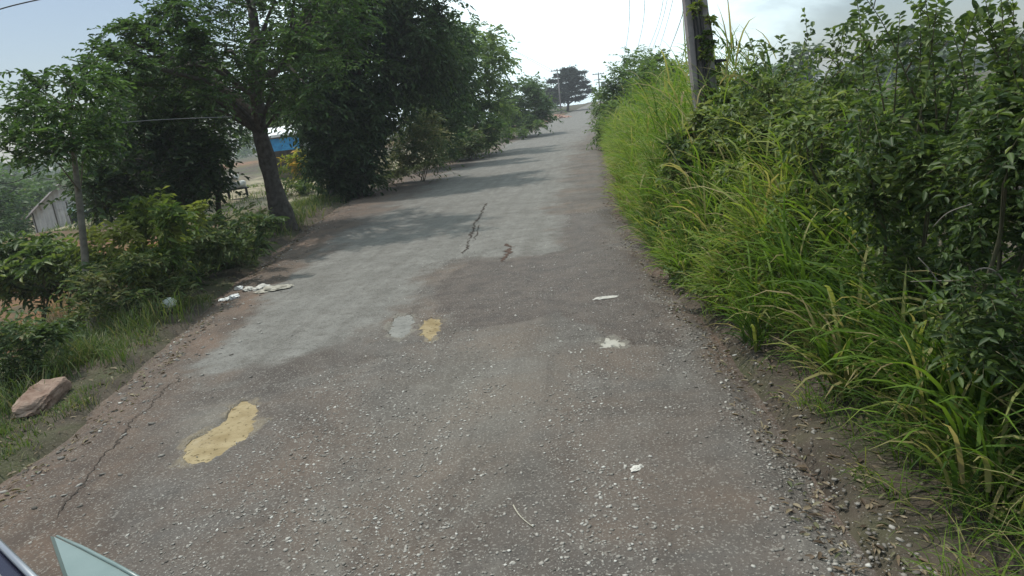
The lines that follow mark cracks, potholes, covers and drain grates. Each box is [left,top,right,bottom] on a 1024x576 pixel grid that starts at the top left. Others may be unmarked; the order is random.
crack [500,243,513,261]
crack [50,378,180,524]
crack [461,203,487,253]
